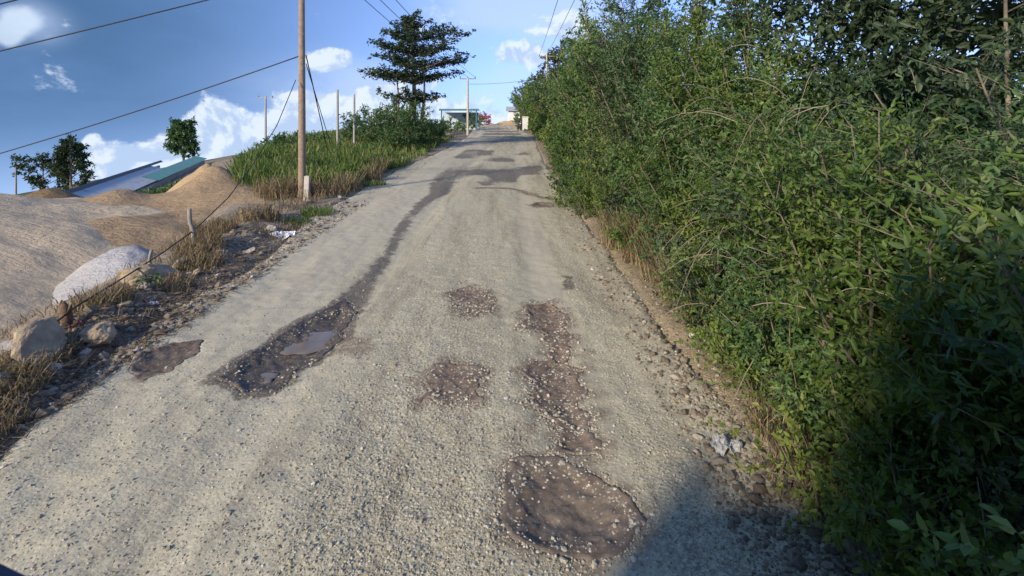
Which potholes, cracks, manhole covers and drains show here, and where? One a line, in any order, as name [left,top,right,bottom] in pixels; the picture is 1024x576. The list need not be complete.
pothole [216,299,358,395]
pothole [500,455,647,563]
pothole [443,286,497,317]
pothole [521,302,603,455]
pothole [413,359,490,405]
